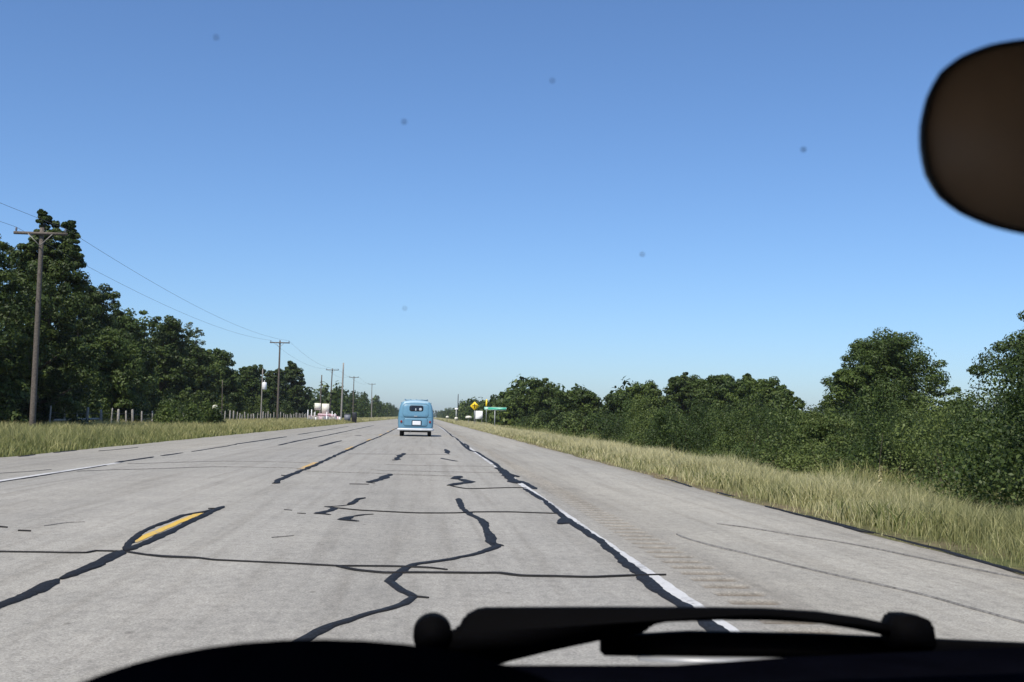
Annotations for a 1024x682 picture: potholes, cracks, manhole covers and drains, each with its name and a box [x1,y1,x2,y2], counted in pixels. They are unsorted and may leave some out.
crack [0,523,1024,623]
crack [0,521,85,531]
crack [0,425,499,482]
crack [284,497,556,522]
